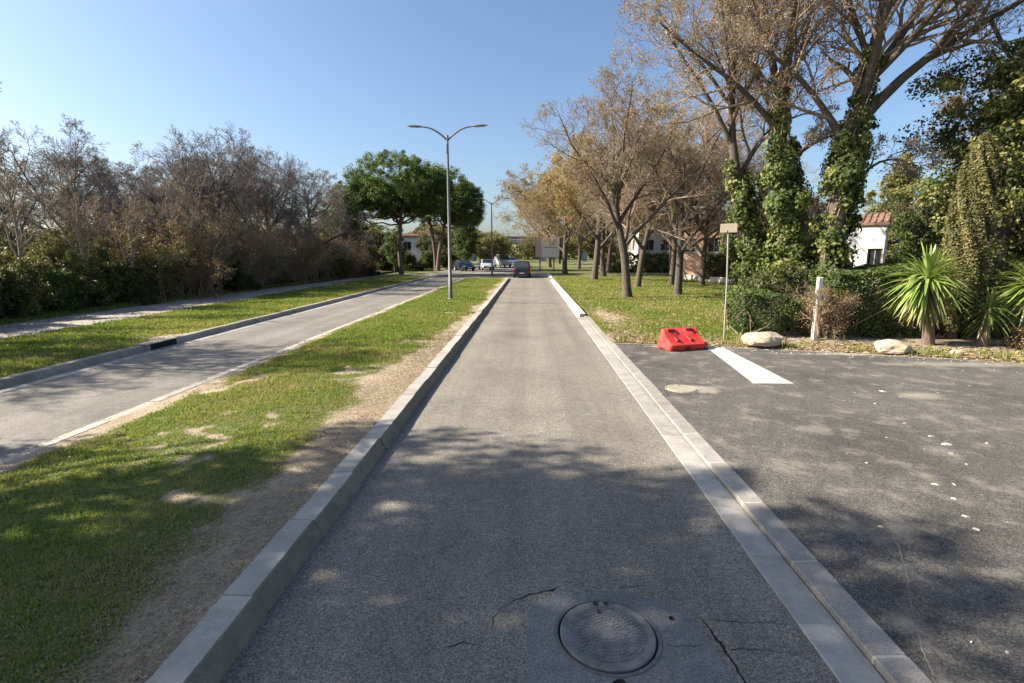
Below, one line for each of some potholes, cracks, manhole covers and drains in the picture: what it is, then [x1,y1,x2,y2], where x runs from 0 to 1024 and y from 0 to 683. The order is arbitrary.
crack [491,586,561,631]
crack [891,535,937,683]
manhole cover [665,384,699,393]
crack [667,617,811,683]
drain grate [136,337,180,351]
manhole cover [554,599,663,678]
